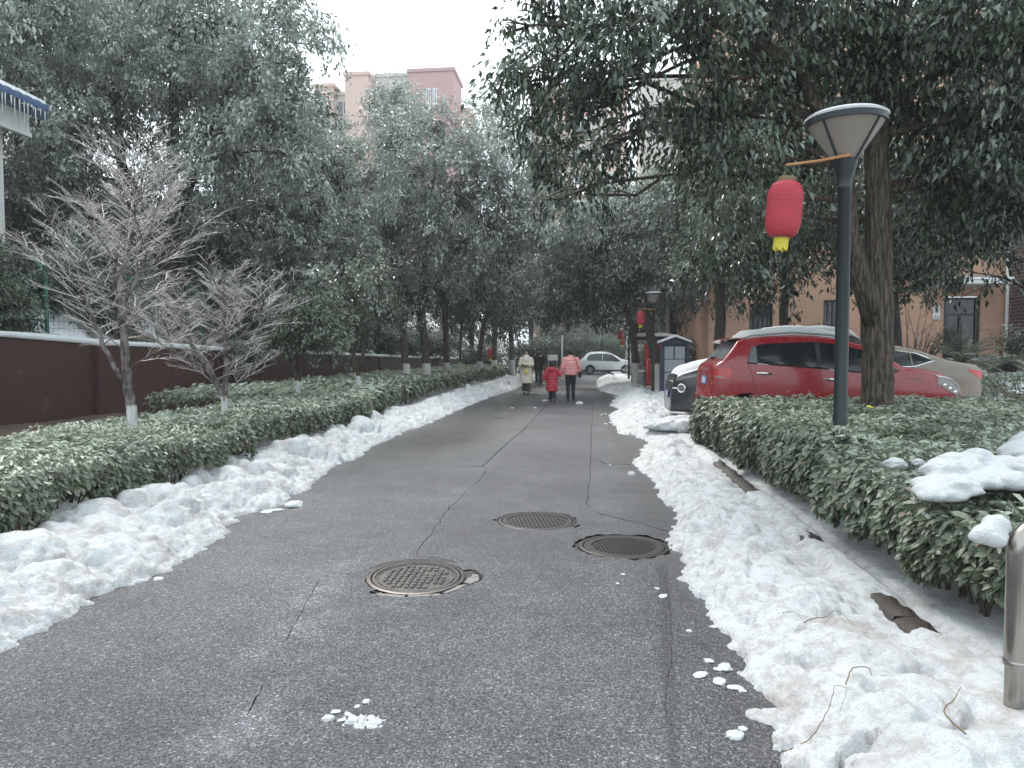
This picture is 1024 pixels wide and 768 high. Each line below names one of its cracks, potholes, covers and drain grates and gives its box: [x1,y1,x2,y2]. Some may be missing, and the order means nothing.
manhole cover [572,534,671,561]
crack [247,579,320,715]
manhole cover [362,559,475,597]
crack [415,391,562,562]
manhole cover [497,512,580,530]
